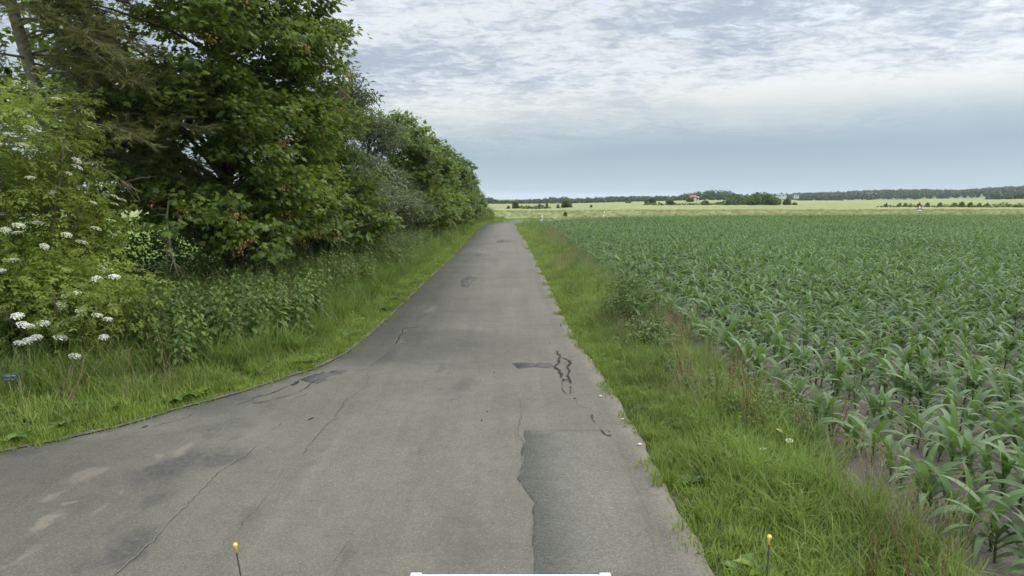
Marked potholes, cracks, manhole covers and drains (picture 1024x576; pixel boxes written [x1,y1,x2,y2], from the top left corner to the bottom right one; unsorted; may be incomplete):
crack [237,379,319,405]
crack [305,306,434,451]
